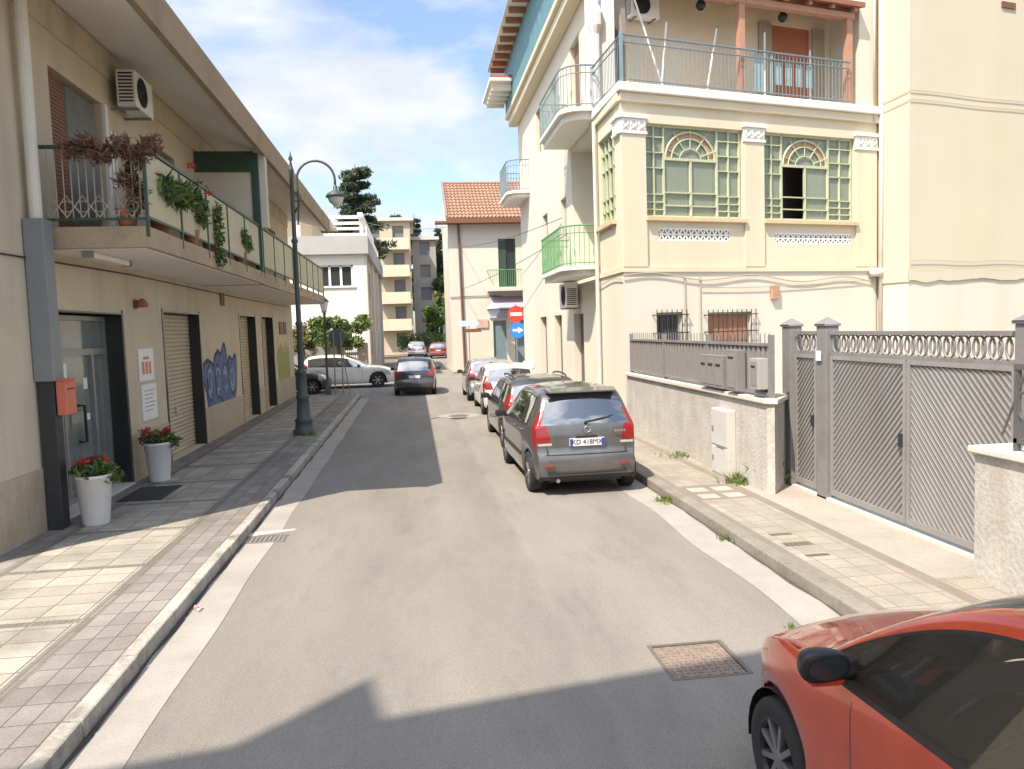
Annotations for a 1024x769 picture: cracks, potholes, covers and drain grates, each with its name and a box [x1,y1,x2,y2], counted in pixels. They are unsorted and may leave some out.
manhole cover [647,639,754,681]
drain grate [242,528,297,544]
